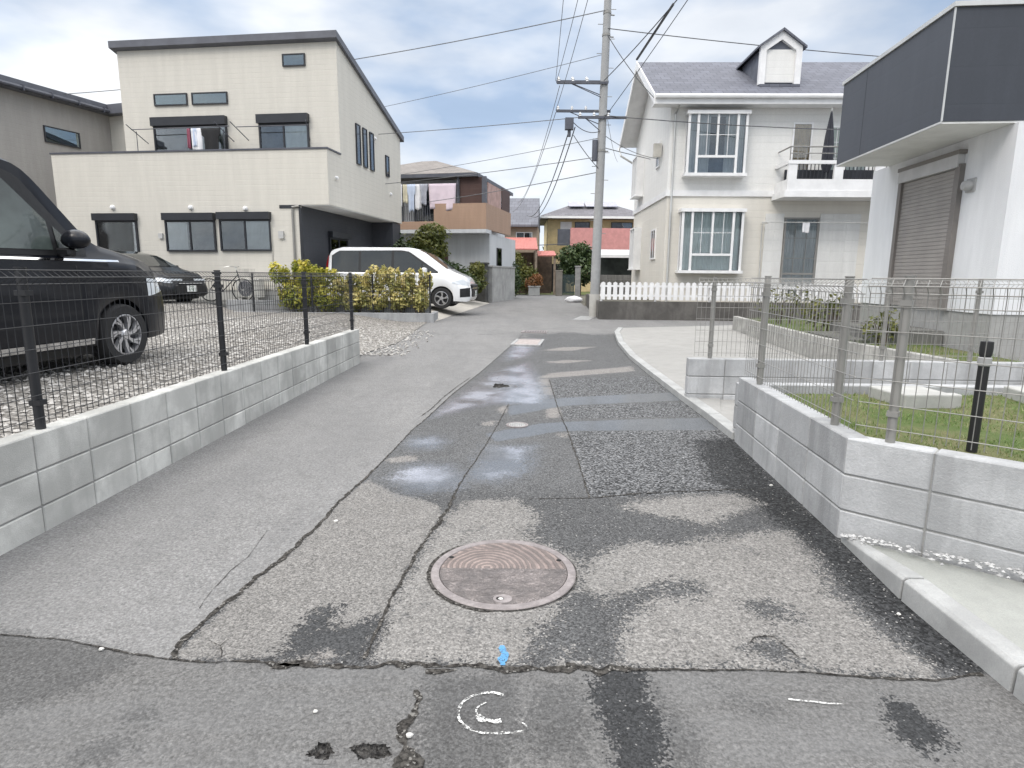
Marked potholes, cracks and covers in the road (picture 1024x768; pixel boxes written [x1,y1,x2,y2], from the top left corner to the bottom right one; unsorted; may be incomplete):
crack [0,404,984,768]
manhole cover [427,540,577,611]
pothole [343,740,398,765]
pothole [300,739,341,765]
